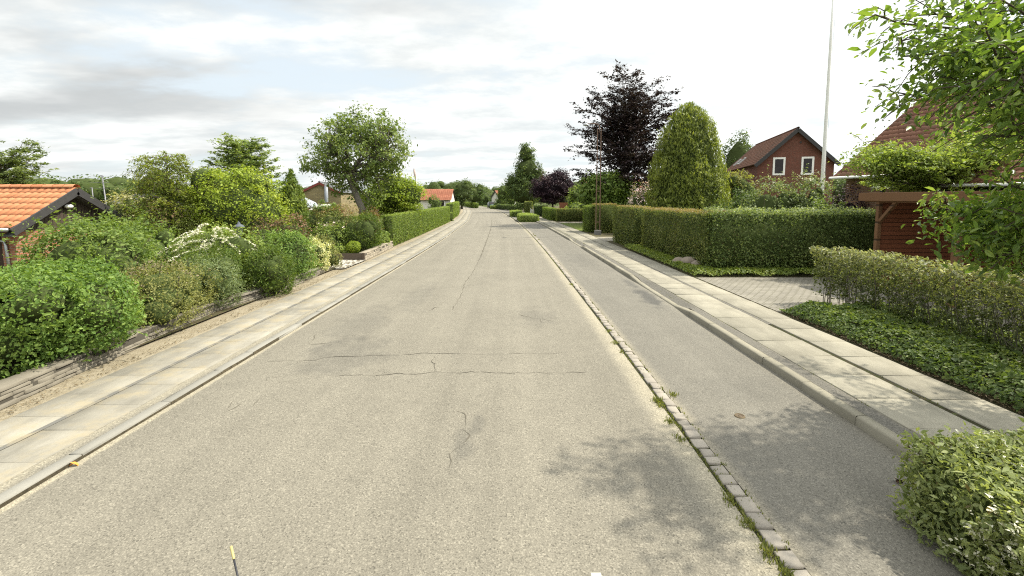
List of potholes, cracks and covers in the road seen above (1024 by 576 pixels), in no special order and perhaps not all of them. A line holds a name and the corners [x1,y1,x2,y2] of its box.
crack [266,336,581,380]
